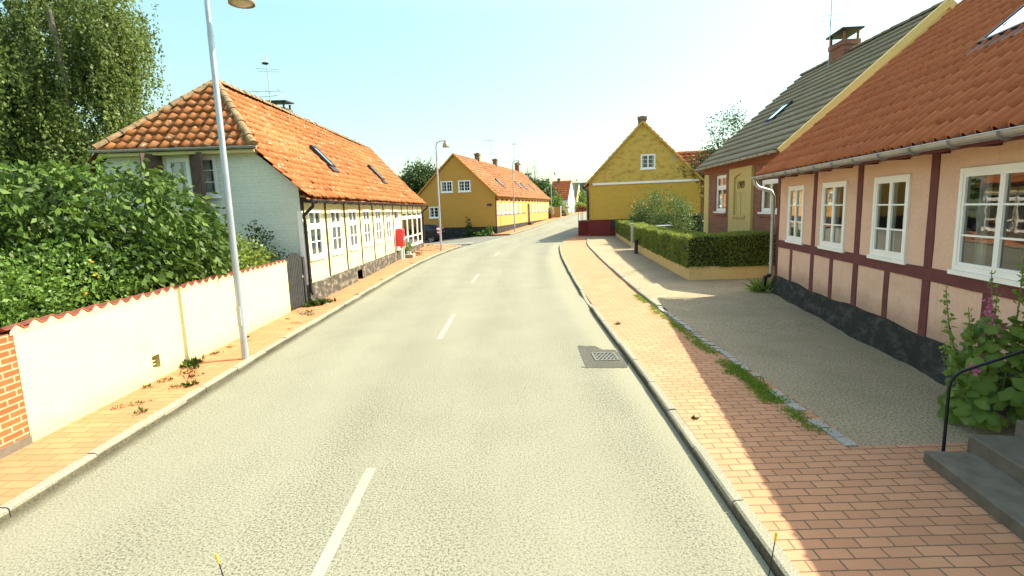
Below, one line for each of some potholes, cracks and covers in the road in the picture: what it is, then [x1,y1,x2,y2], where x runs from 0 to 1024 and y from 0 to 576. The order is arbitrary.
drain grate [591,352,620,361]
